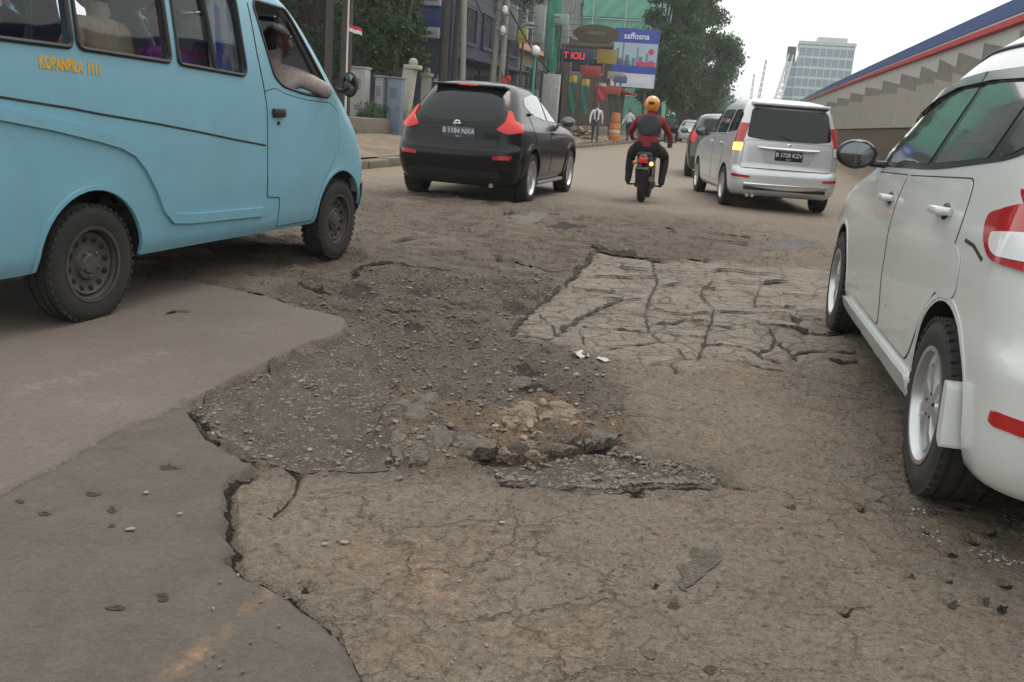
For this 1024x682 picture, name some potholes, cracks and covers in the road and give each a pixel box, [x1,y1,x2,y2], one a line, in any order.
pothole [505,383,555,396]
pothole [499,298,531,316]
pothole [511,362,542,378]
pothole [485,452,723,490]
crack [823,606,871,616]
crack [187,411,363,682]
crack [590,486,711,498]
pothole [406,288,433,298]
crack [494,226,858,375]
pothole [199,334,403,474]
pothole [340,281,380,300]
